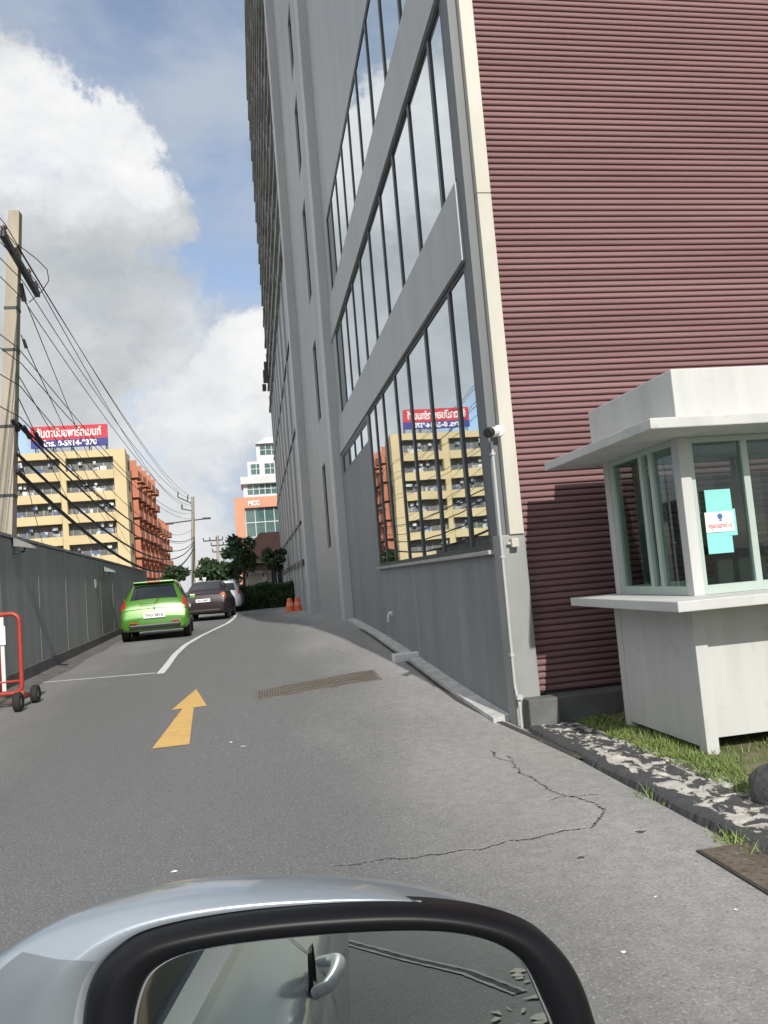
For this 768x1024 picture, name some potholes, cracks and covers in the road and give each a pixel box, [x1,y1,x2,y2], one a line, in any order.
drain grate [255,669,382,701]
crack [334,749,605,866]
manhole cover [696,842,768,895]
